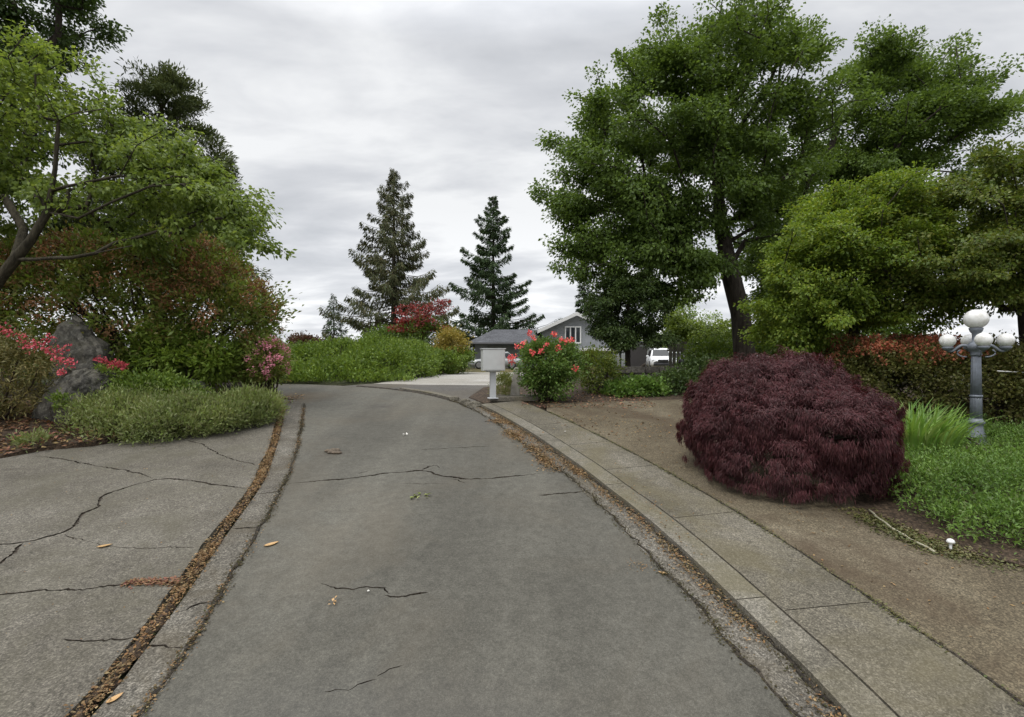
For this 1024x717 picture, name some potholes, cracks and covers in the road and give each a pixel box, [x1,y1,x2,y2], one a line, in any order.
crack [321,583,428,598]
crack [0,580,162,595]
crack [325,666,400,692]
crack [64,636,185,648]
crack [0,456,245,564]
crack [259,446,537,494]
